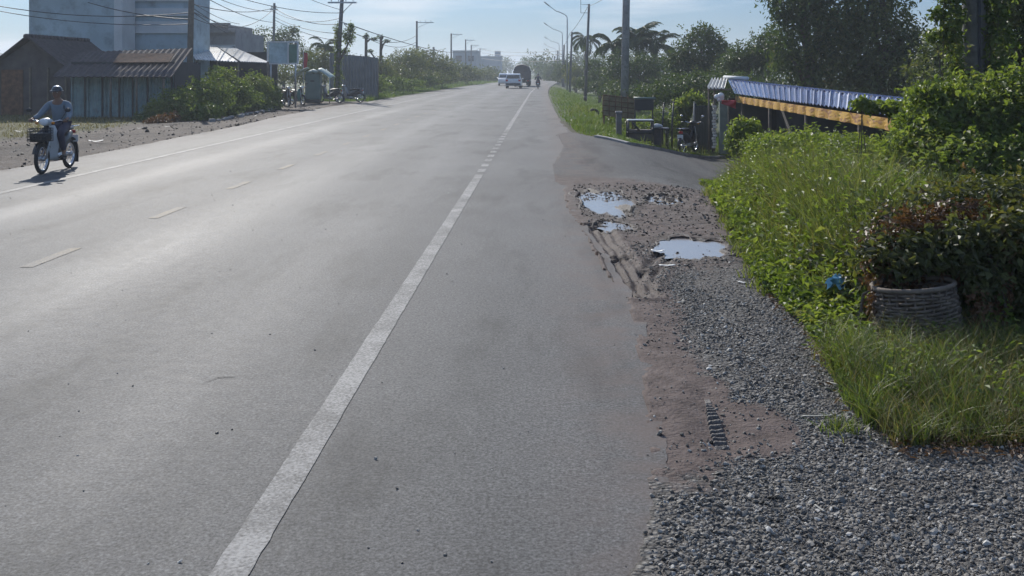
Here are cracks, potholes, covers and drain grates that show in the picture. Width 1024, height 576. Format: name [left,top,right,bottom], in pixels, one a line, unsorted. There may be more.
pothole [591,219,642,236]
pothole [642,233,737,262]
pothole [568,188,640,219]
pothole [641,192,691,206]
